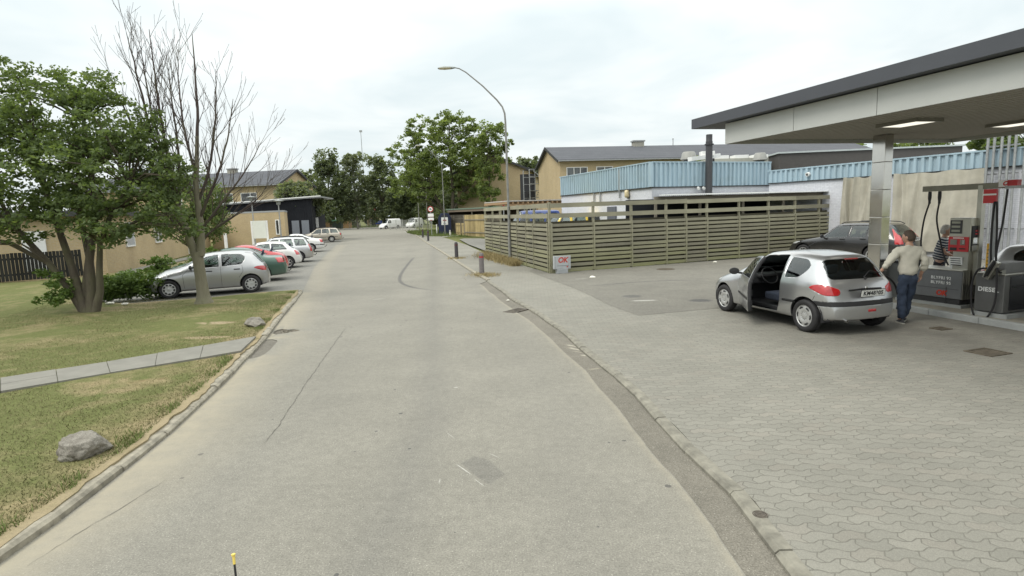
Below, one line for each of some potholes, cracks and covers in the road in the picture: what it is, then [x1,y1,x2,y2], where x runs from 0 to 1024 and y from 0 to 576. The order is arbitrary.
crack [267,336,340,440]
manhole cover [963,347,1013,357]
